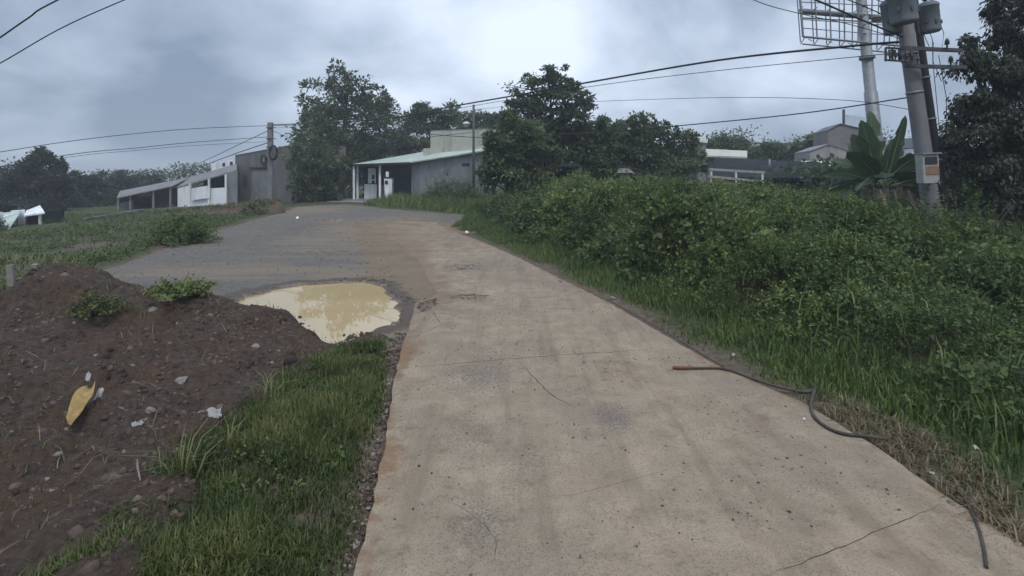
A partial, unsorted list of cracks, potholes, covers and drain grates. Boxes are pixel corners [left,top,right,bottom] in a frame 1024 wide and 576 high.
pothole [234,280,405,323]
pothole [416,298,438,312]
